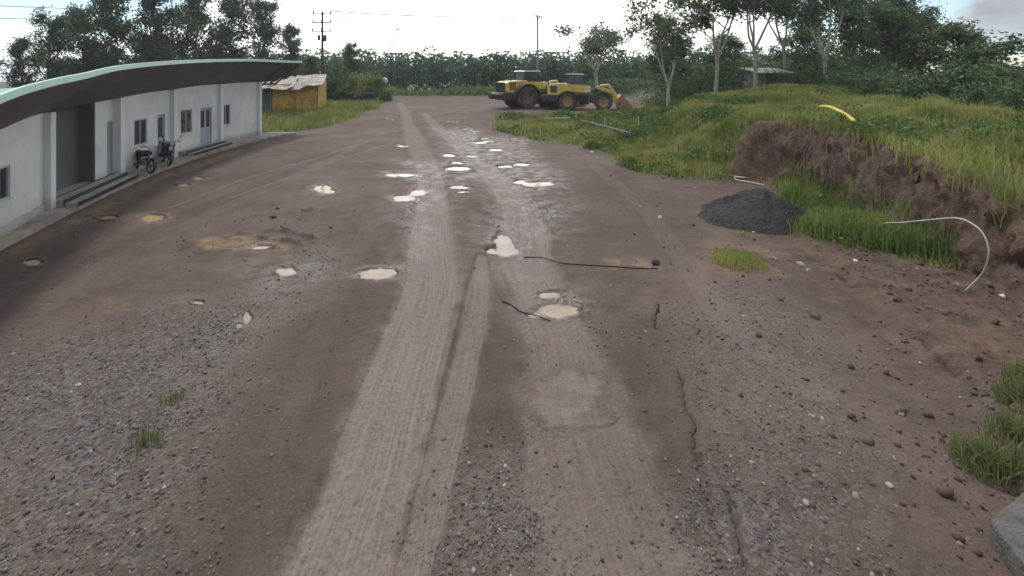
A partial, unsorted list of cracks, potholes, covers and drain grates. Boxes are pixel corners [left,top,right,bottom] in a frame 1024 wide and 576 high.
pothole [93,213,122,221]
pothole [386,187,429,204]
pothole [130,212,172,225]
pothole [509,178,565,188]
crack [664,368,711,465]
pothole [521,298,593,323]
pothole [309,182,340,195]
pothole [268,264,303,278]
pothole [244,243,283,251]
pothole [482,229,526,261]
crack [703,485,766,571]
crack [644,302,669,330]
